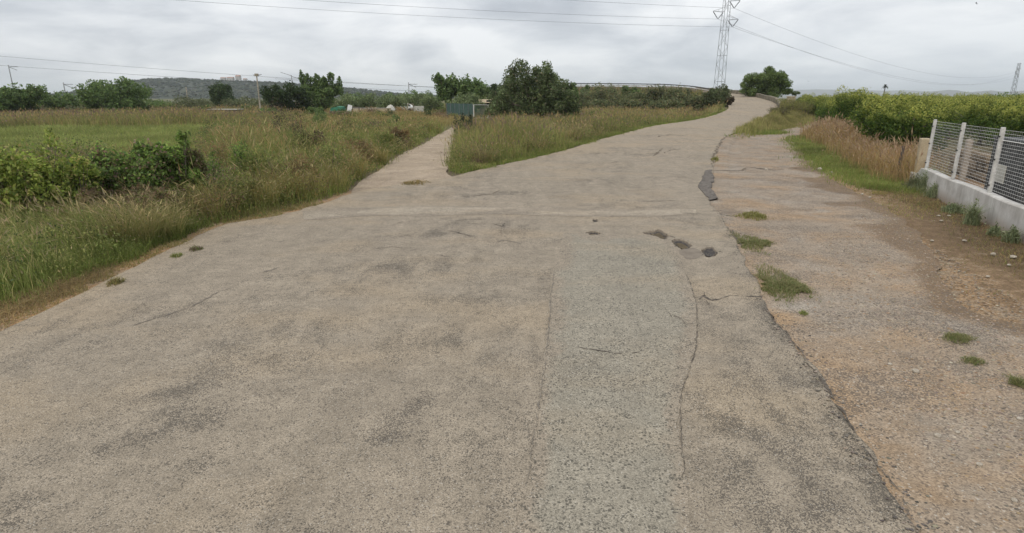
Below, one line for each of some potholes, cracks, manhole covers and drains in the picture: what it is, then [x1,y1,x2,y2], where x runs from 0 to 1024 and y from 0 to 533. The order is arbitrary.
pothole [702,247,717,257]
crack [699,292,911,509]
